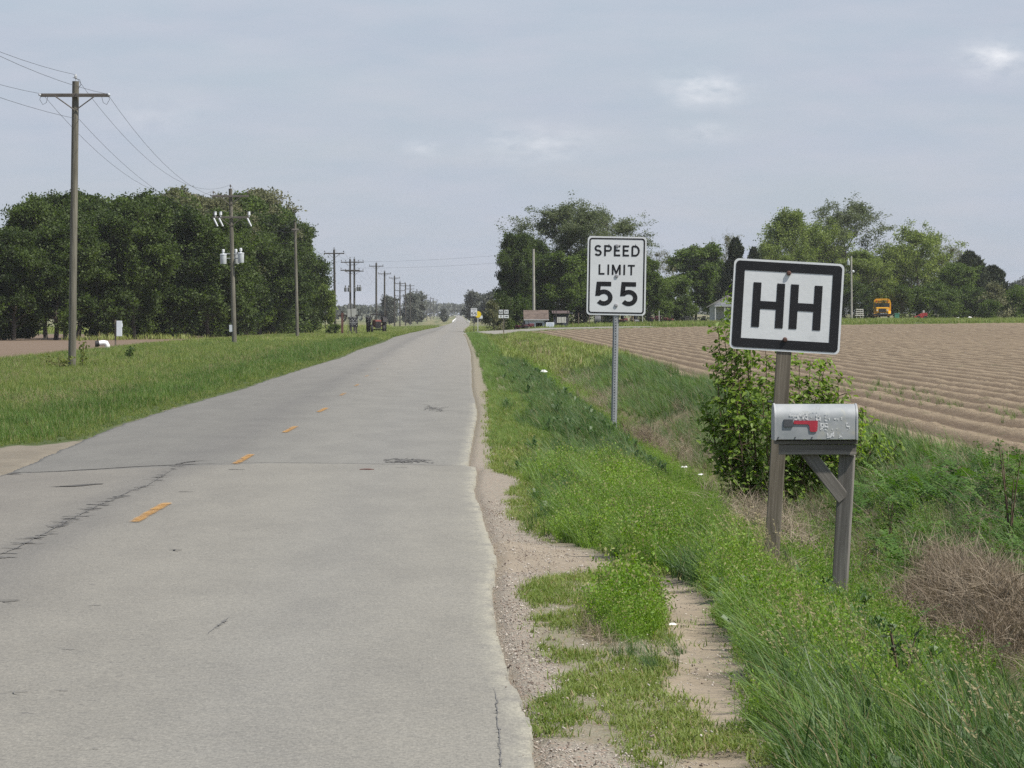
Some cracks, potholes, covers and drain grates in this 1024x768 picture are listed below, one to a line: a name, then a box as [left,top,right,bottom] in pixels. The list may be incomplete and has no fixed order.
crack [494,687,503,768]
crack [0,458,456,558]
